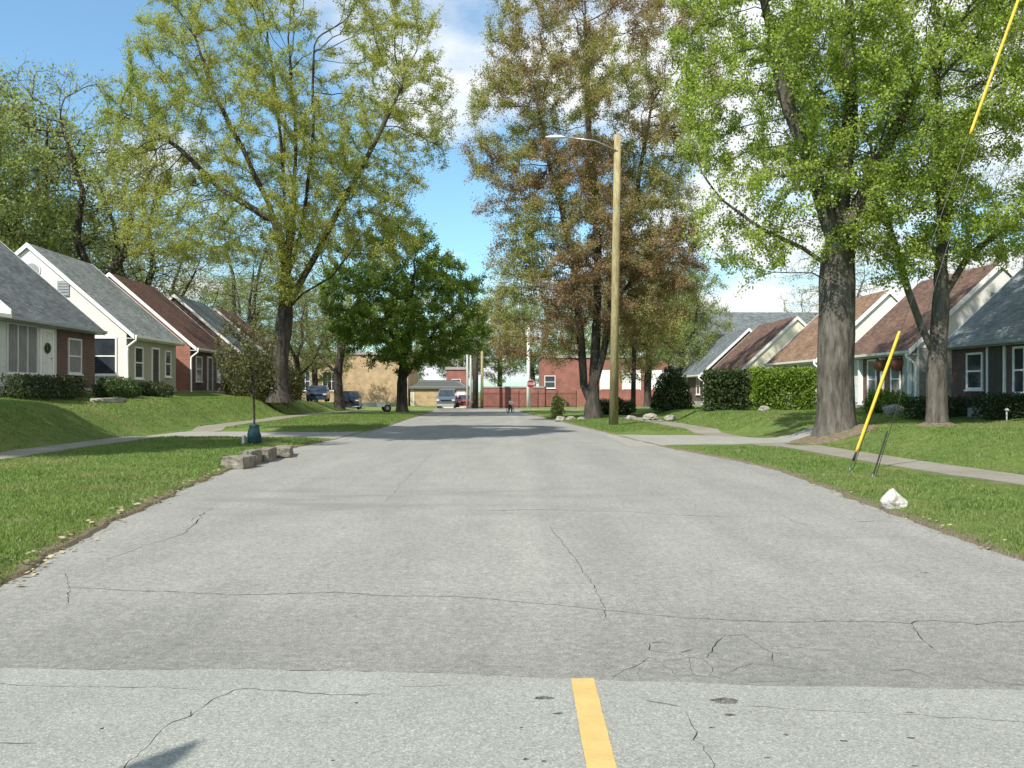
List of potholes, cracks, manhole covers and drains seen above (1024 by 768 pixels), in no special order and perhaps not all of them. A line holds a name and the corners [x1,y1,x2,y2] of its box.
crack [645,700,715,768]
crack [0,683,461,768]
crack [65,574,1024,683]
crack [489,509,723,618]
